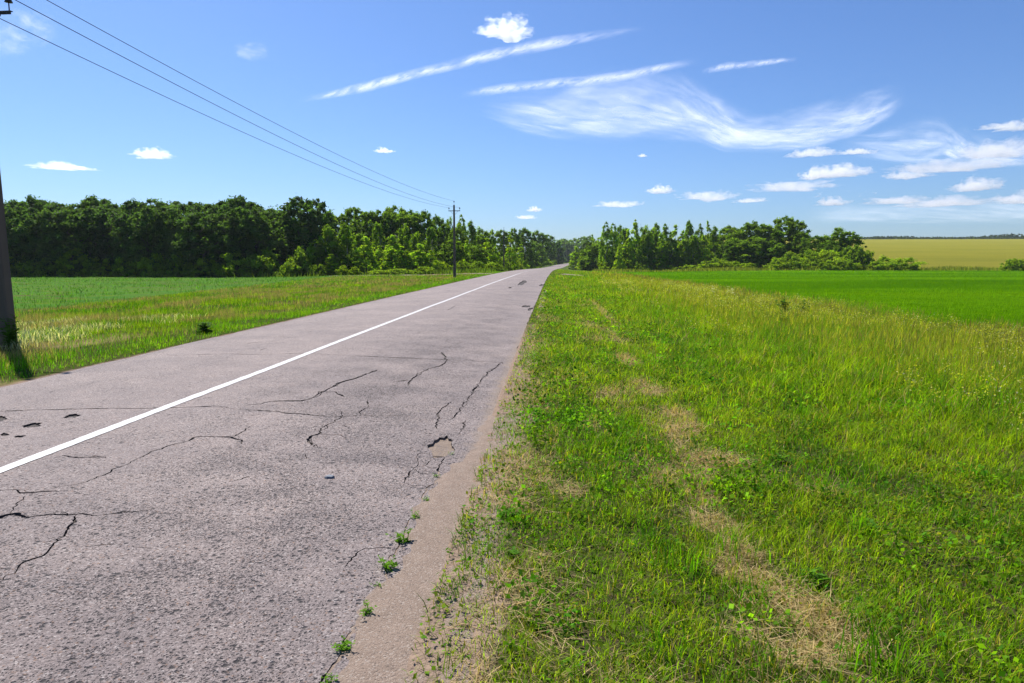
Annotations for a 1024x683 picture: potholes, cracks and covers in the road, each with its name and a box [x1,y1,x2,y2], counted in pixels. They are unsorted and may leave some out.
pothole [427,436,455,458]
crack [5,352,503,683]
